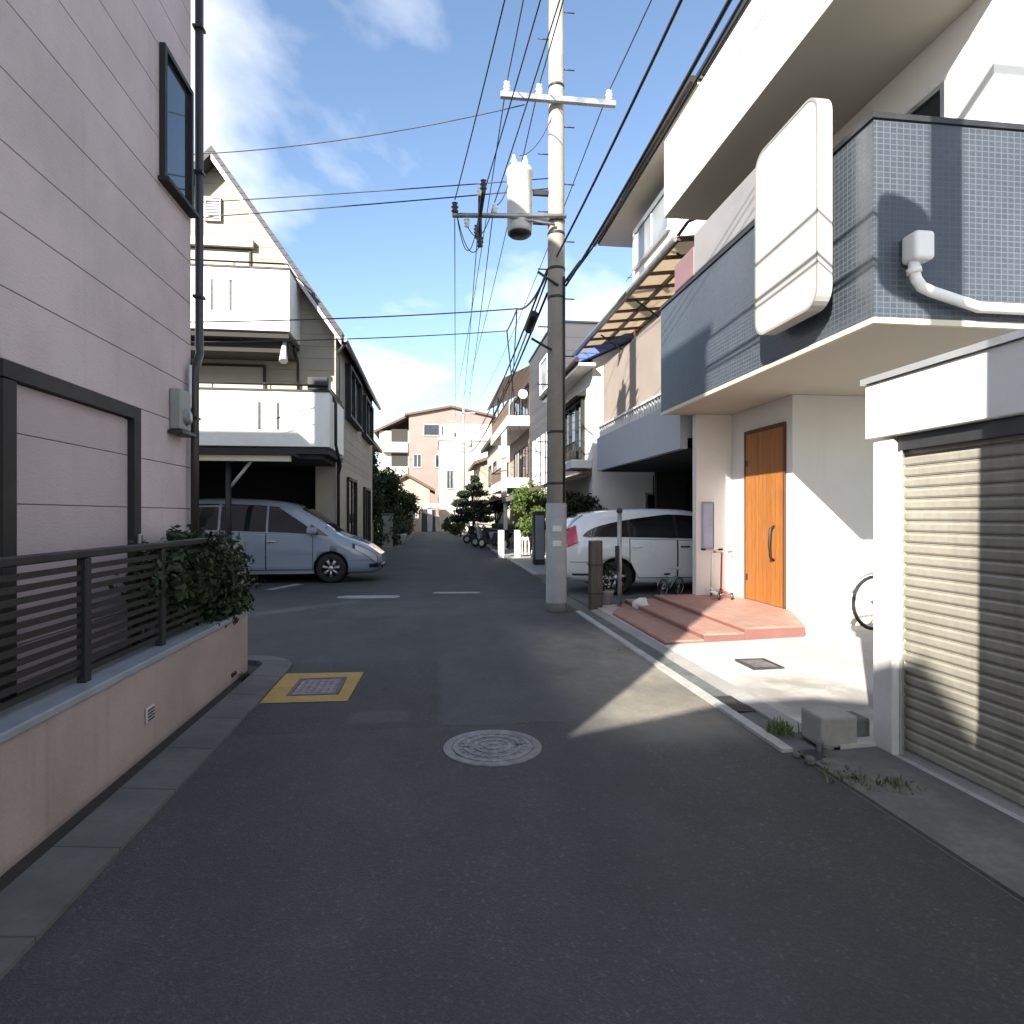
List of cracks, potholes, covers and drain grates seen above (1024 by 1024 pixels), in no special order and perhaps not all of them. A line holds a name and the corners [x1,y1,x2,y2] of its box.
manhole cover [286,677,347,696]
drain grate [713,695,756,713]
manhole cover [443,730,542,767]
